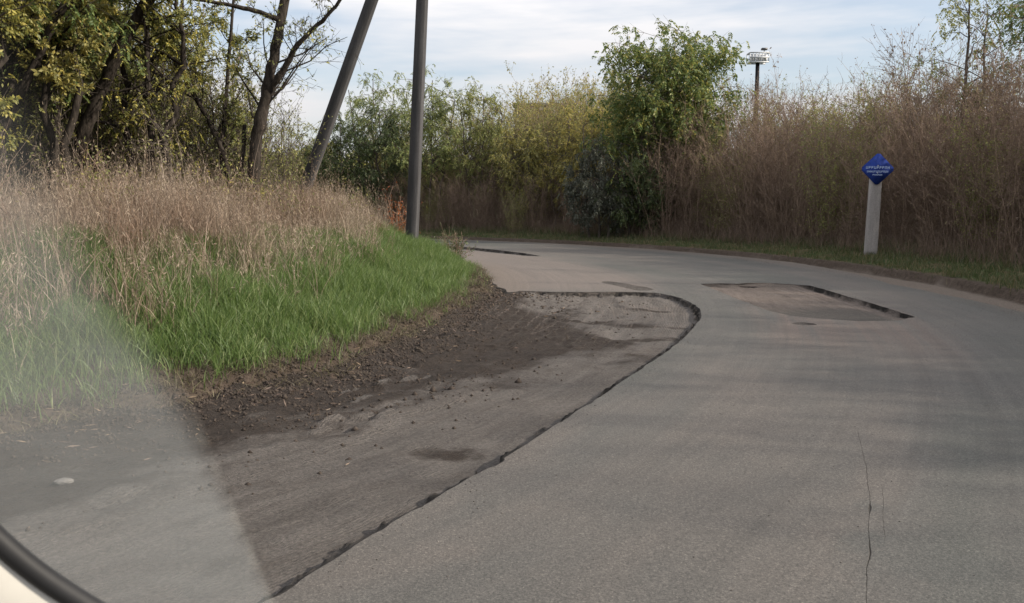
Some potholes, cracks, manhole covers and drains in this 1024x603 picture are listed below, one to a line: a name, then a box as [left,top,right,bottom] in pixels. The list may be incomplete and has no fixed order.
pothole [0,282,701,603]
pothole [702,283,914,321]
crack [857,430,885,603]
